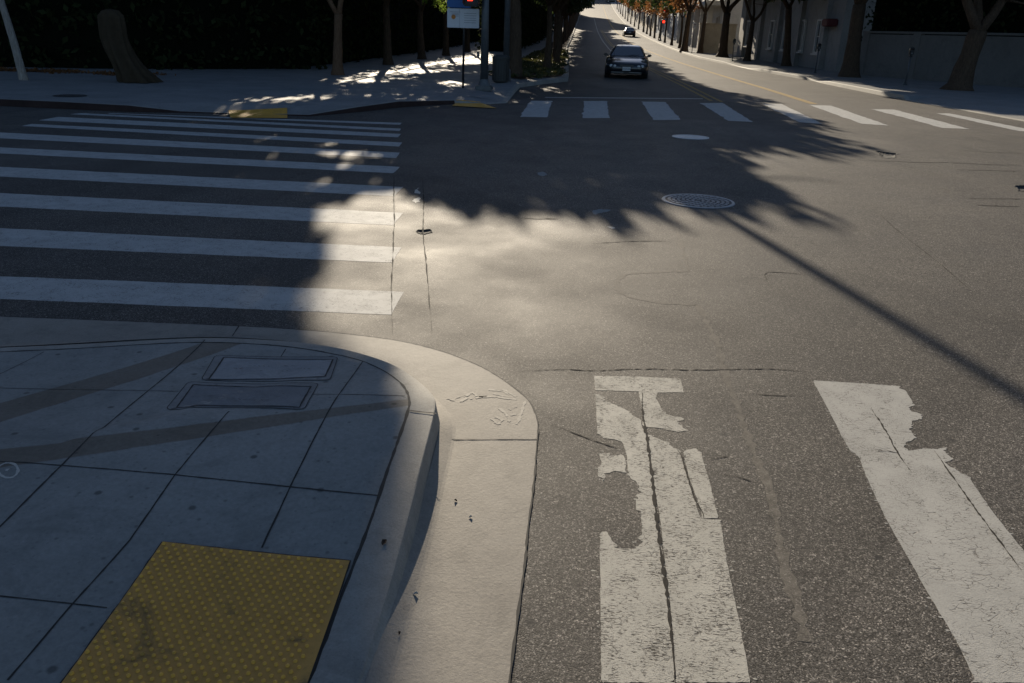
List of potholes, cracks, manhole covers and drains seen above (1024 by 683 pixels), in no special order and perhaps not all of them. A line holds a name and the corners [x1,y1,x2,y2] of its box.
utility cover [167,382,318,410]
crack [641,393,755,683]
manhole cover [662,194,735,209]
utility cover [202,355,338,381]
crack [871,407,912,473]
